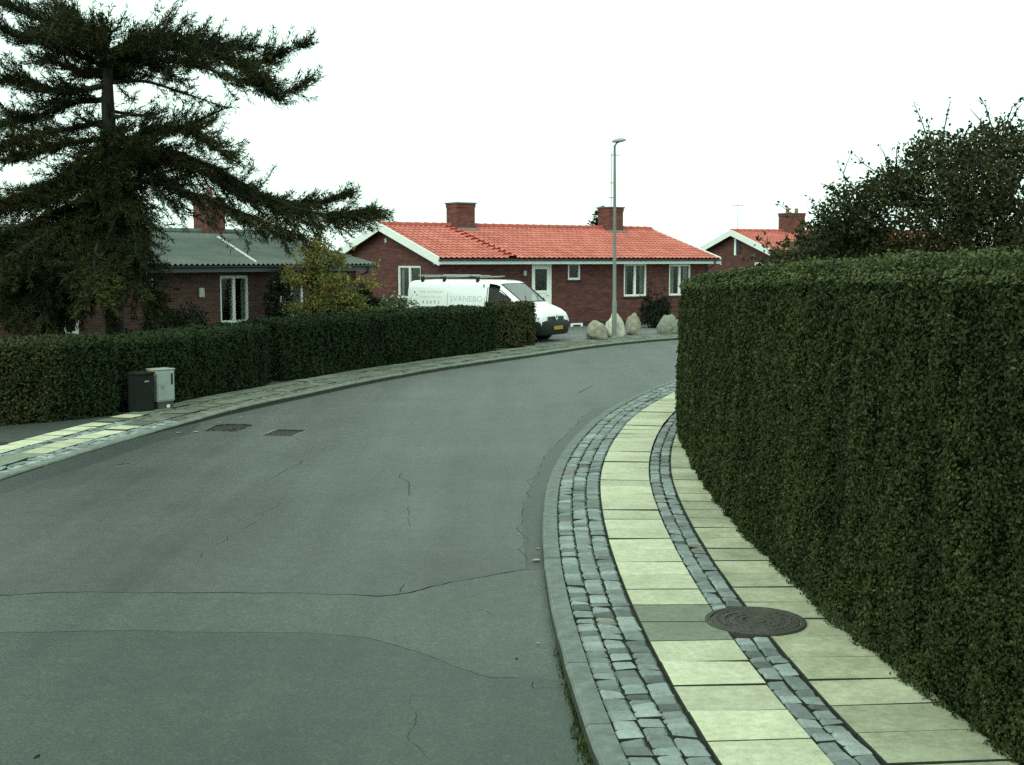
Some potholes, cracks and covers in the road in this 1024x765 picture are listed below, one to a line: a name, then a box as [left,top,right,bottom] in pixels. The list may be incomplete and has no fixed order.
manhole cover [705,606,807,640]
crack [0,387,593,597]
crack [0,630,554,689]
